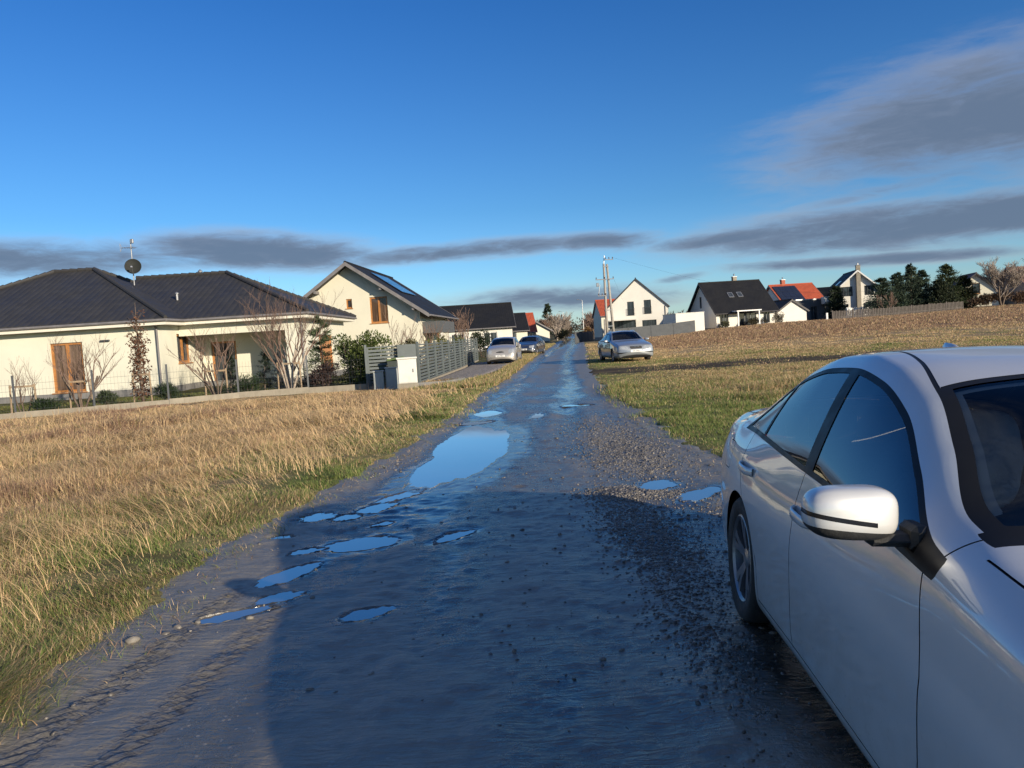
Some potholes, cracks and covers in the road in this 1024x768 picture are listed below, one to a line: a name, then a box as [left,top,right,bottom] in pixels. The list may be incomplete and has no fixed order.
pothole [321,535,402,553]
pothole [679,486,721,502]
pothole [252,561,325,588]
pothole [638,480,678,490]
pothole [188,604,281,625]
pothole [433,529,477,544]
pothole [337,605,398,622]
pothole [402,424,515,493]
pothole [353,501,400,515]
